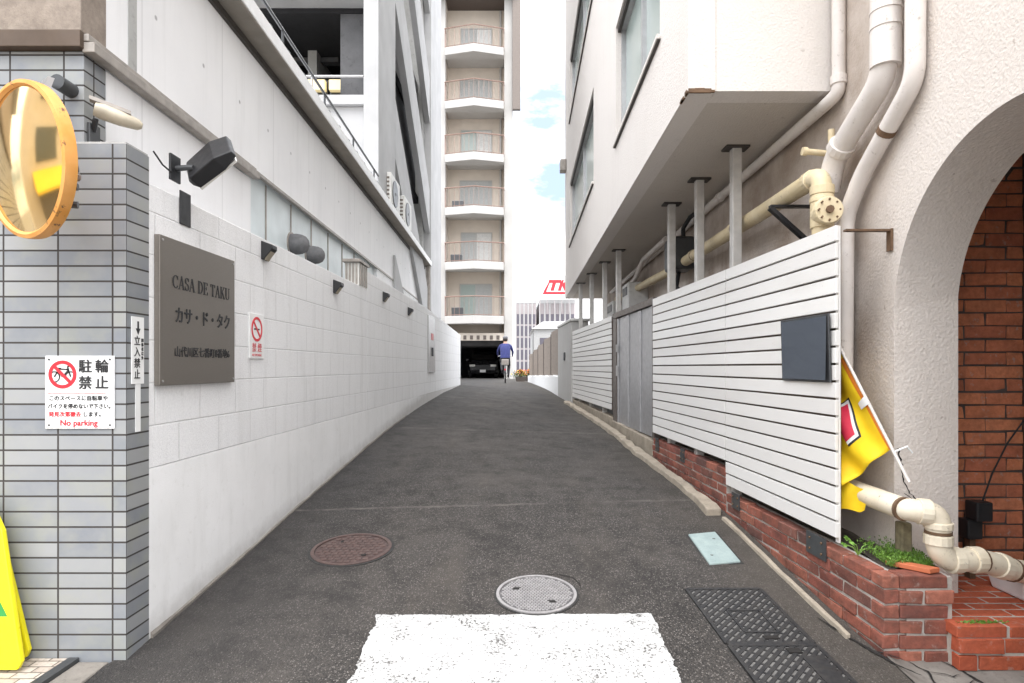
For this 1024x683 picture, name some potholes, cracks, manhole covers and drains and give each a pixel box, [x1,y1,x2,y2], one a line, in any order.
manhole cover [494,575,579,615]
manhole cover [307,533,395,567]
utility cover [685,532,744,565]
